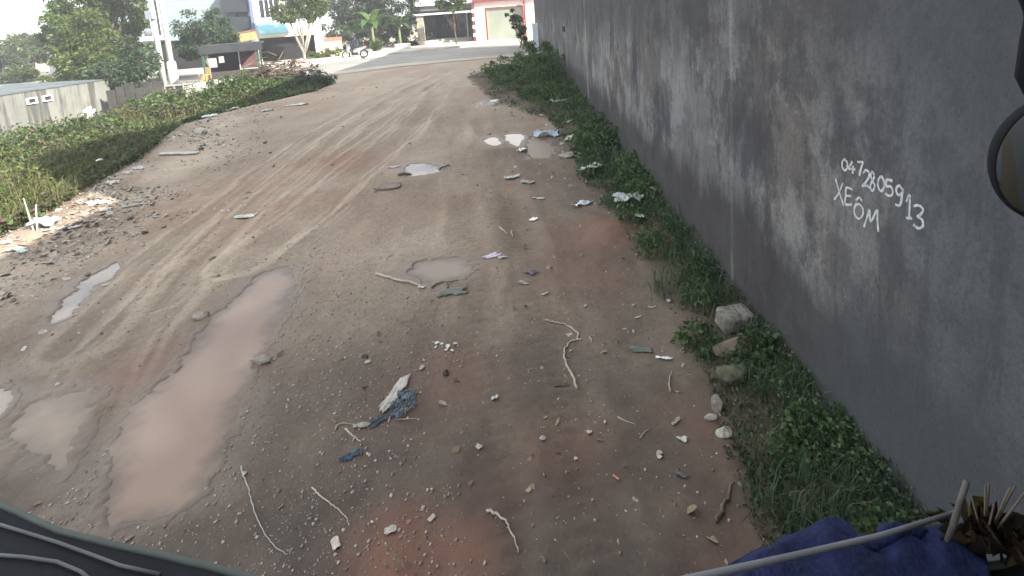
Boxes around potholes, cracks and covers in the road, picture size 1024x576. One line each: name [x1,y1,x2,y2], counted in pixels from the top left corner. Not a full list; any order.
pothole [399,254,480,287]
pothole [34,259,128,327]
pothole [401,162,444,178]
pothole [479,135,506,147]
pothole [0,382,113,486]
pothole [502,132,530,148]
pothole [522,135,557,160]
pothole [77,264,306,537]
